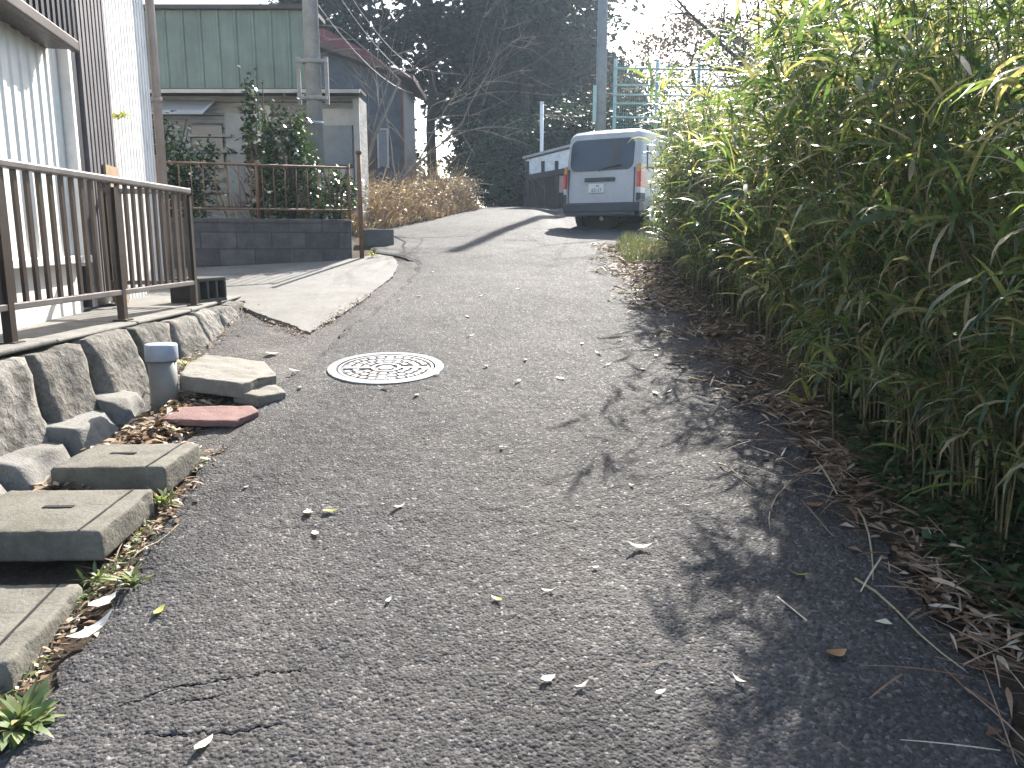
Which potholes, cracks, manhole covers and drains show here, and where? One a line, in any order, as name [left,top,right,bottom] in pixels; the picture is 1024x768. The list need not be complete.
manhole cover [327,352,444,385]
crack [144,723,283,738]
